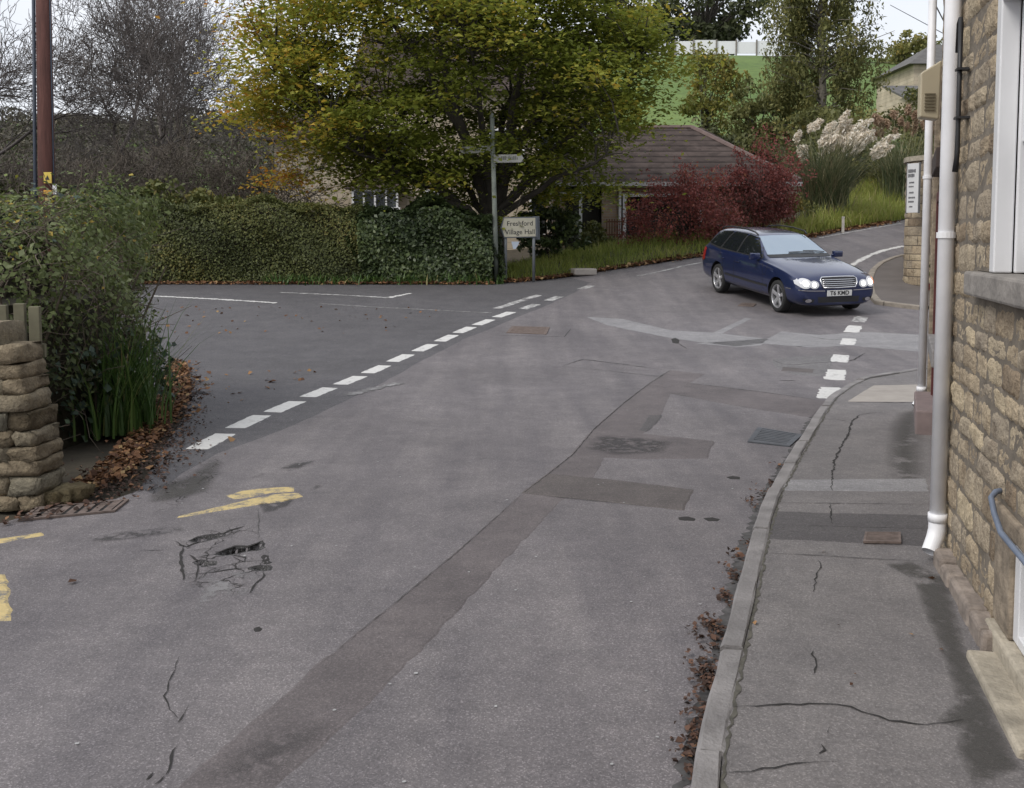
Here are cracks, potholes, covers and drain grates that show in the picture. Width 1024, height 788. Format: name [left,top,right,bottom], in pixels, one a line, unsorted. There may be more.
drain grate [747,427,802,447]
manhole cover [863,532,901,544]
pothole [214,541,266,556]
pothole [189,533,226,544]
crack [163,657,187,722]
crack [146,746,177,785]
manhole cover [506,326,550,335]
crack [732,703,962,772]
crack [829,412,881,524]
